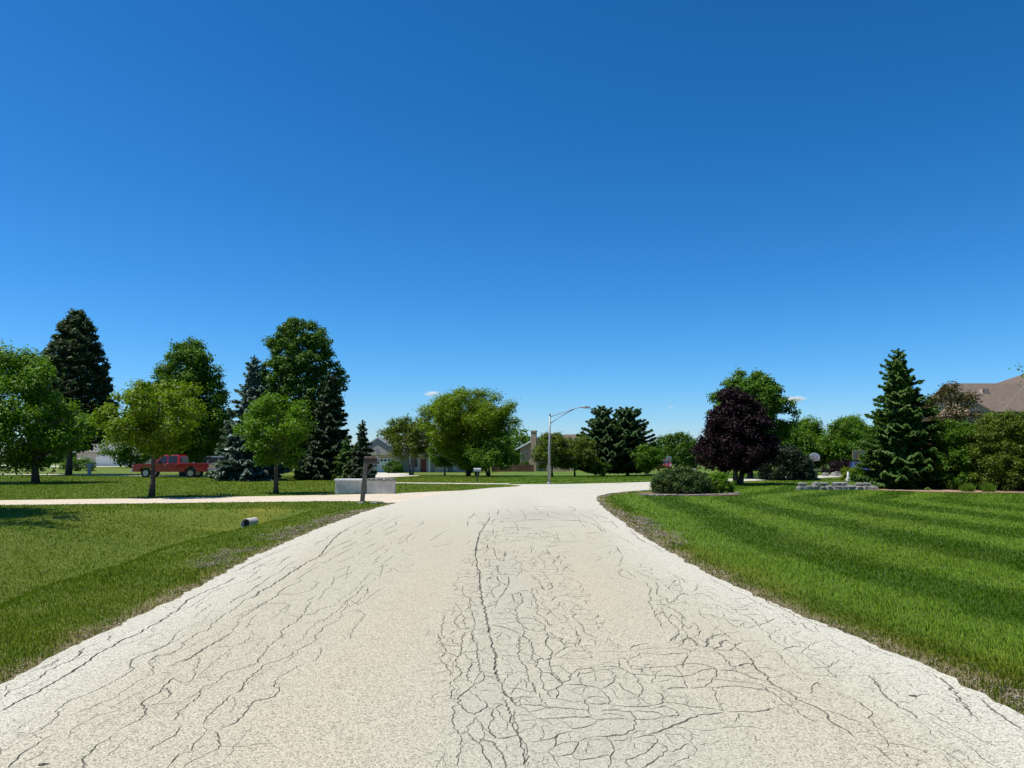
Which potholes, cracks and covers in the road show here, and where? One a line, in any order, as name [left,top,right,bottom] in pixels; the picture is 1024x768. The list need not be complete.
crack [434,508,1024,768]
crack [0,515,423,768]
